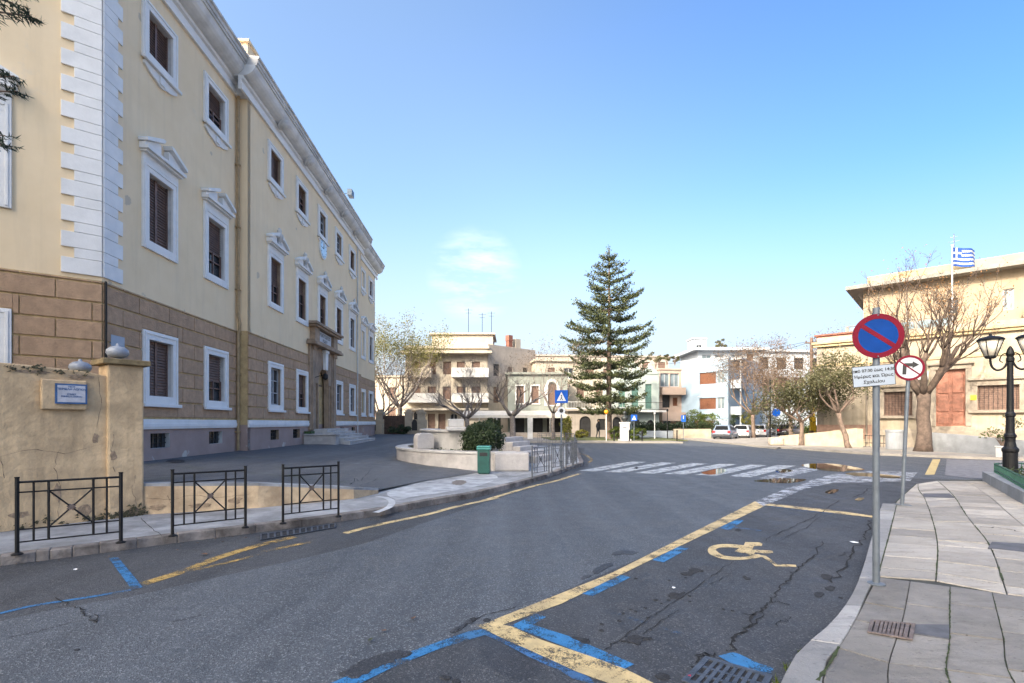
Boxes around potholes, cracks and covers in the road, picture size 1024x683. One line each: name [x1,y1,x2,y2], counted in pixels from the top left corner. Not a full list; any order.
crack [691,520,872,668]
drain grate [260,523,336,540]
crack [12,597,99,637]
drain grate [681,656,773,683]
